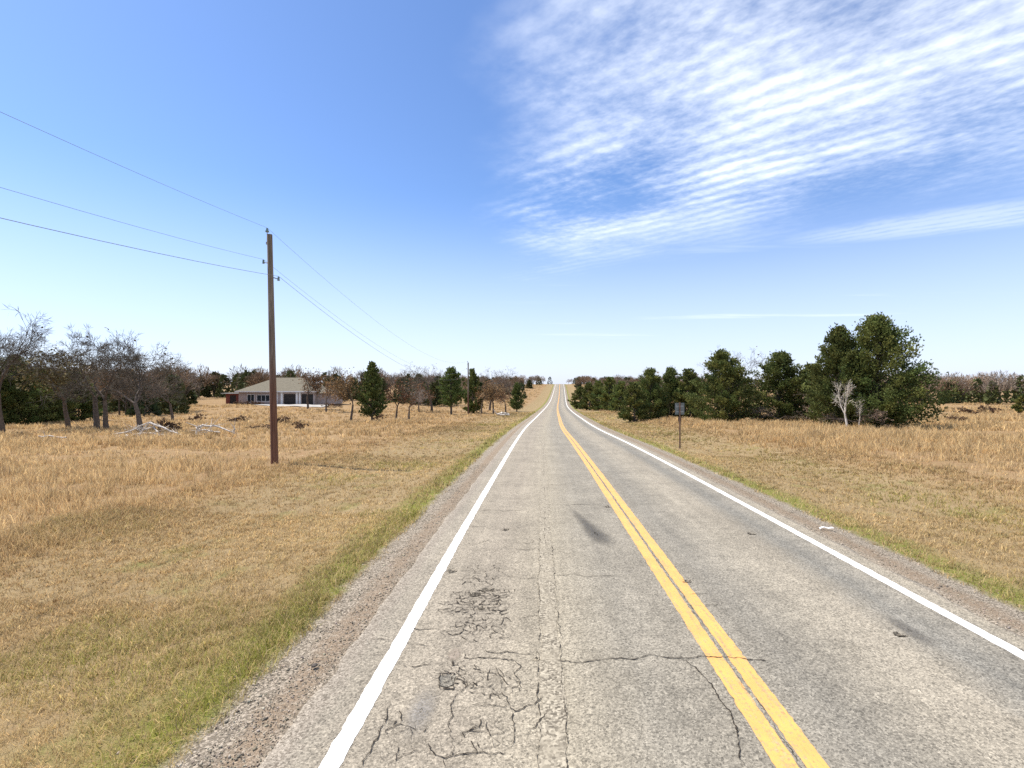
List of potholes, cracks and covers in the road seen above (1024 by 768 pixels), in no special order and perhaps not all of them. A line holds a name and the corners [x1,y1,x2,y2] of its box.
crack [362,563,547,766]
pothole [439,674,456,687]
crack [561,654,770,767]
